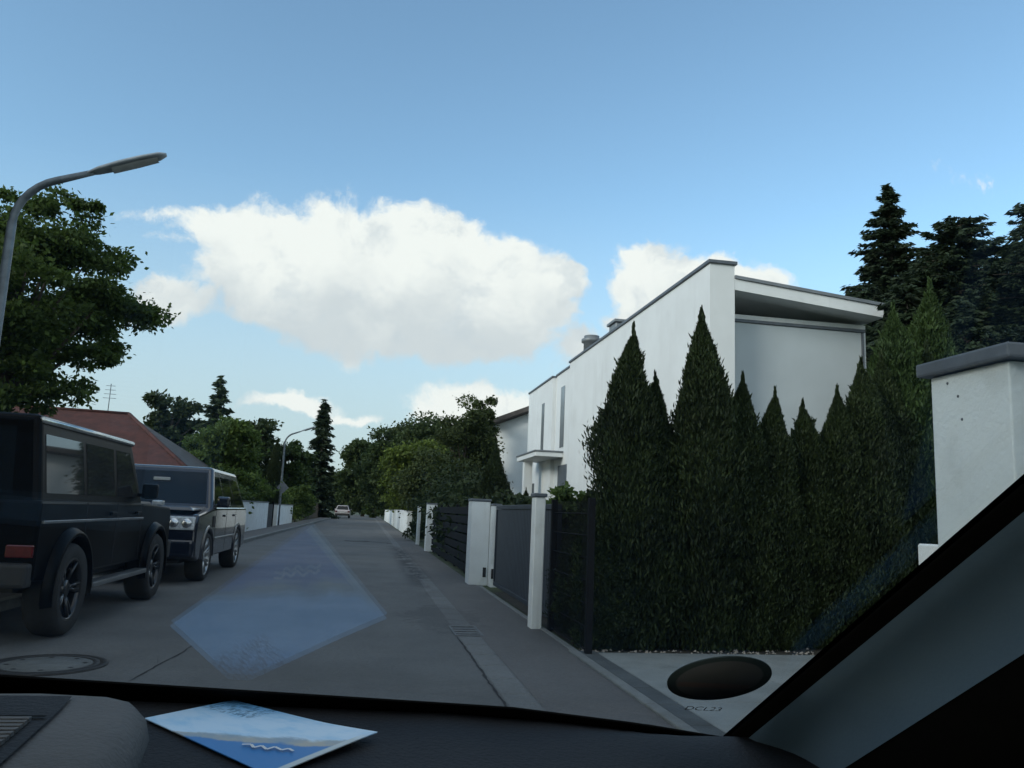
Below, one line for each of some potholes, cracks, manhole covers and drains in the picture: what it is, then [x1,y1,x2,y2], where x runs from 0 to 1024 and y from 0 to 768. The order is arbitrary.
crack [128,645,193,682]
manhole cover [0,654,109,677]
drain grate [448,625,484,637]
